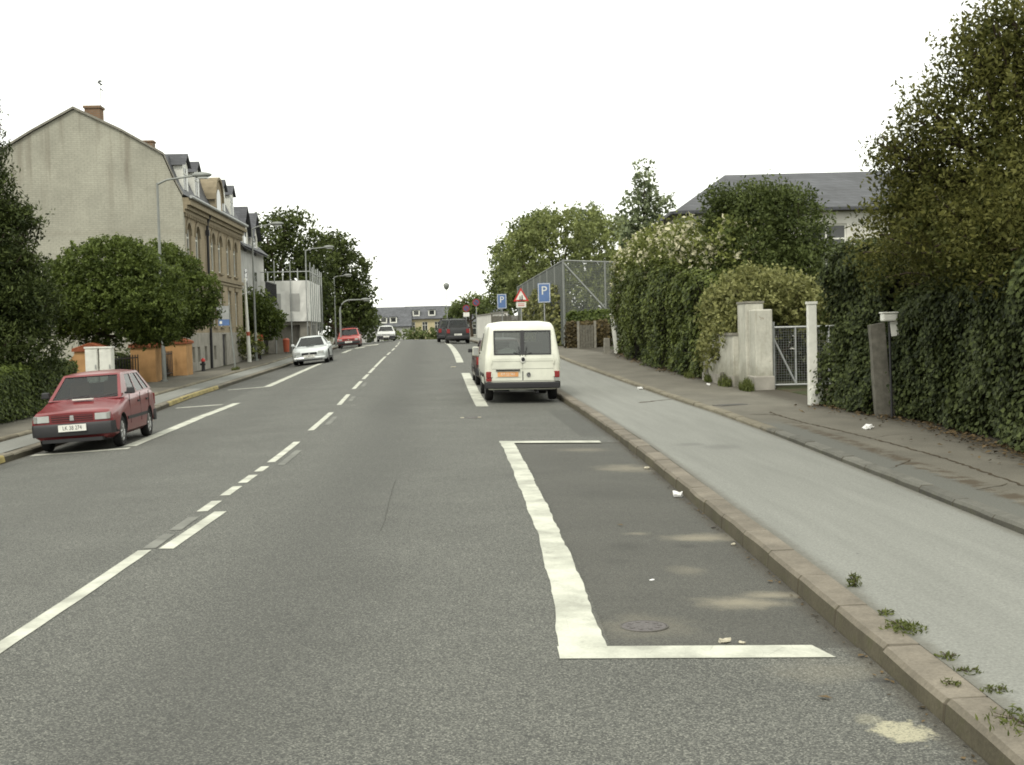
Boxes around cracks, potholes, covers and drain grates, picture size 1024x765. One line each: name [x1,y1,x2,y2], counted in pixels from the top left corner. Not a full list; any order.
manhole cover [620,620,669,632]
